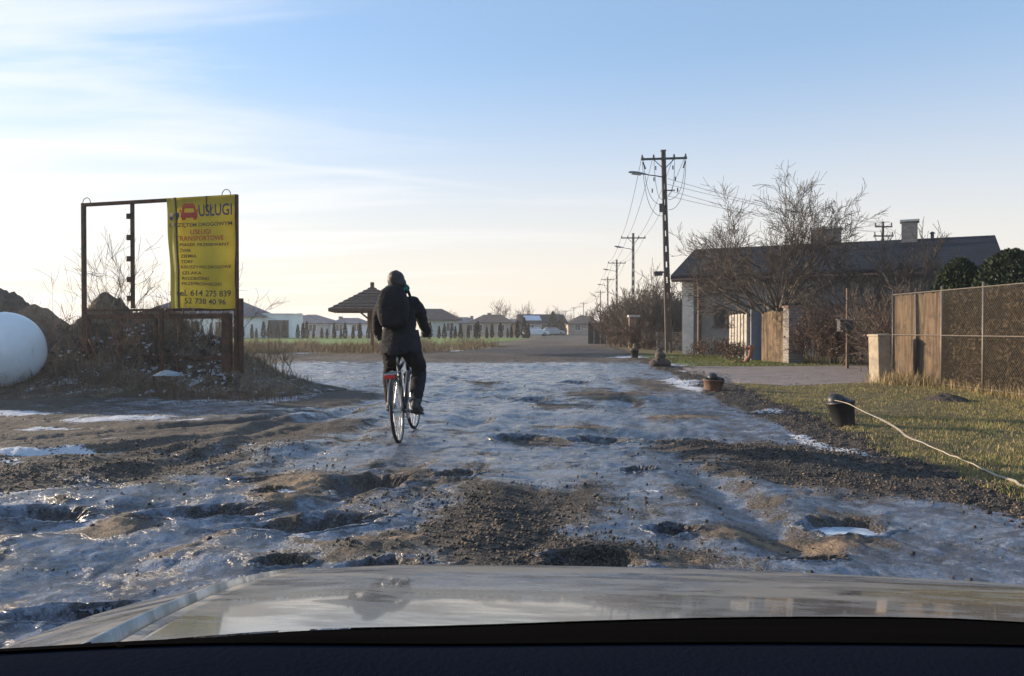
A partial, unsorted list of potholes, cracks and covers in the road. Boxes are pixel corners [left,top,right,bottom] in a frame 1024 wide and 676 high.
pothole [638,520,705,538]
pothole [562,434,638,446]
pothole [487,432,552,443]
pothole [110,501,284,521]
pothole [0,504,100,524]
pothole [789,513,908,538]
pothole [316,471,423,499]
pothole [246,552,316,568]
